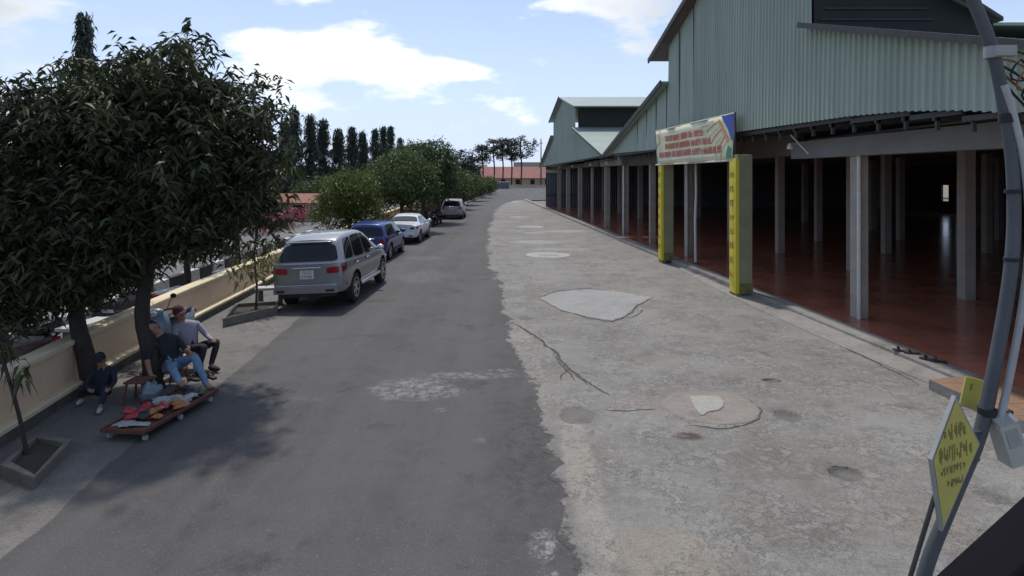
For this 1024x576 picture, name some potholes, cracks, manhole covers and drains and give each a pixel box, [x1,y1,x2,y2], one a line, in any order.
crack [844,347,919,385]
pothole [556,406,597,425]
pothole [772,409,806,423]
crack [514,288,651,411]
pothole [825,465,869,482]
